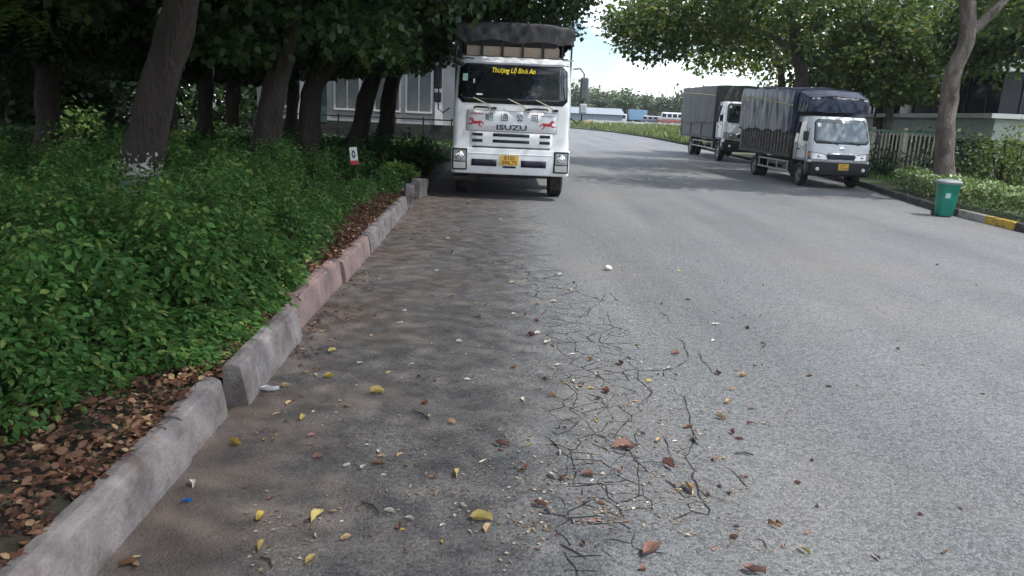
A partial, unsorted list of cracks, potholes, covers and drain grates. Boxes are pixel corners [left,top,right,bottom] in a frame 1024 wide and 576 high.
crack [675,392,767,548]
crack [516,269,697,575]
